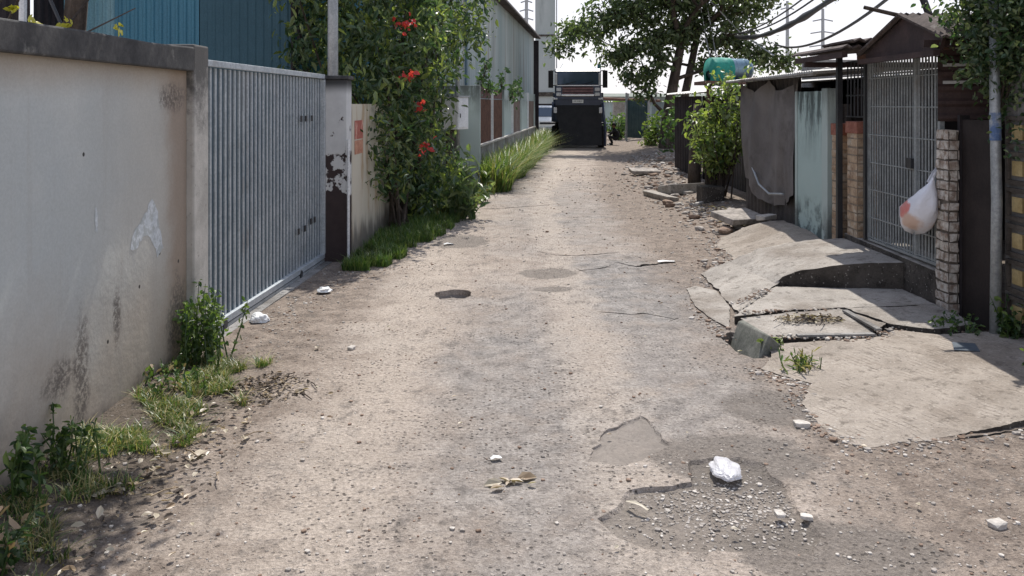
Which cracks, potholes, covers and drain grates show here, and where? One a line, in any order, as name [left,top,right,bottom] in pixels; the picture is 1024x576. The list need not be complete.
pothole [583,452,839,565]
crack [527,250,692,274]
crack [595,309,680,322]
pothole [427,288,478,303]
crack [928,426,1024,451]
pothole [576,411,684,472]
